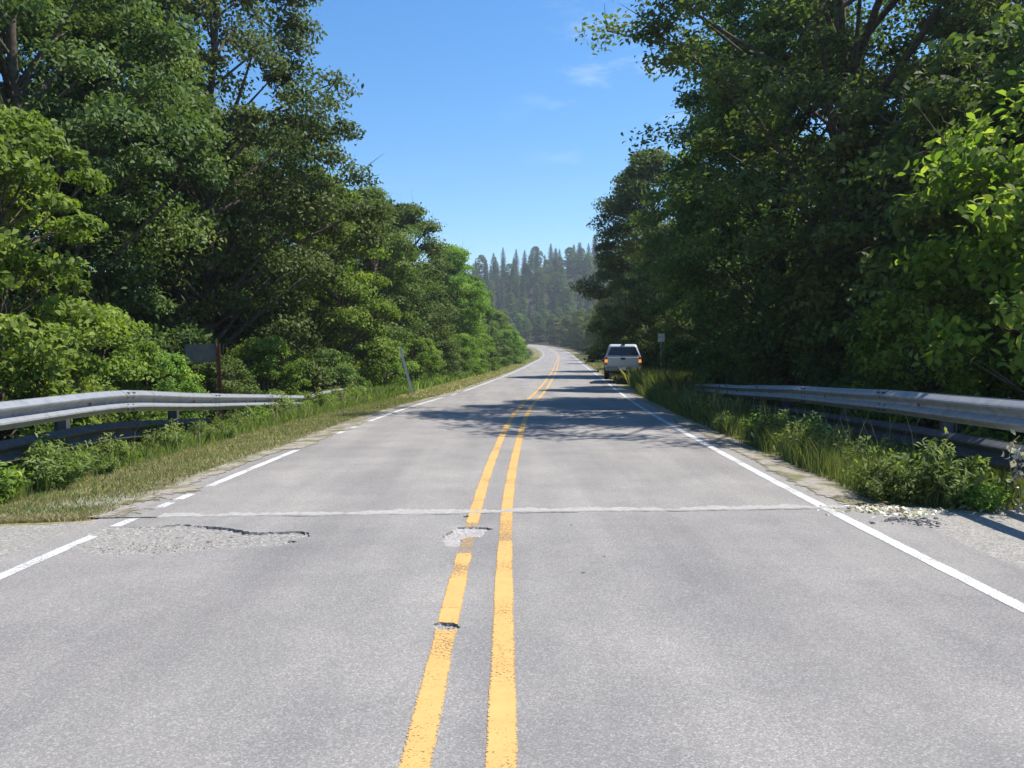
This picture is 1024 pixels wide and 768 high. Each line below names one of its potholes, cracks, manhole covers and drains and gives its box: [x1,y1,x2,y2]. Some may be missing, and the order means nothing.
pothole [442,527,492,547]
pothole [73,524,310,555]
pothole [432,623,460,631]
